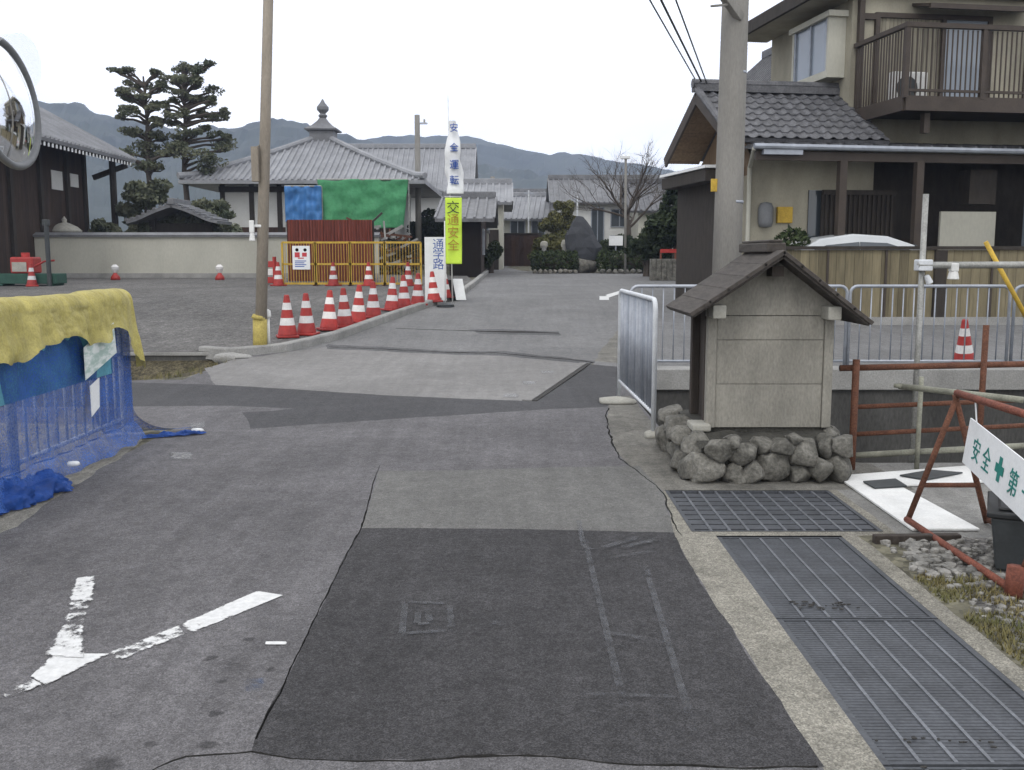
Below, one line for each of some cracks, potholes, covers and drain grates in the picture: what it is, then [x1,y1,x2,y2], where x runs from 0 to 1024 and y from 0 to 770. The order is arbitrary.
drain grate [717,537,937,619]
drain grate [777,619,1024,767]
drain grate [666,491,883,537]
crack [605,408,680,533]
